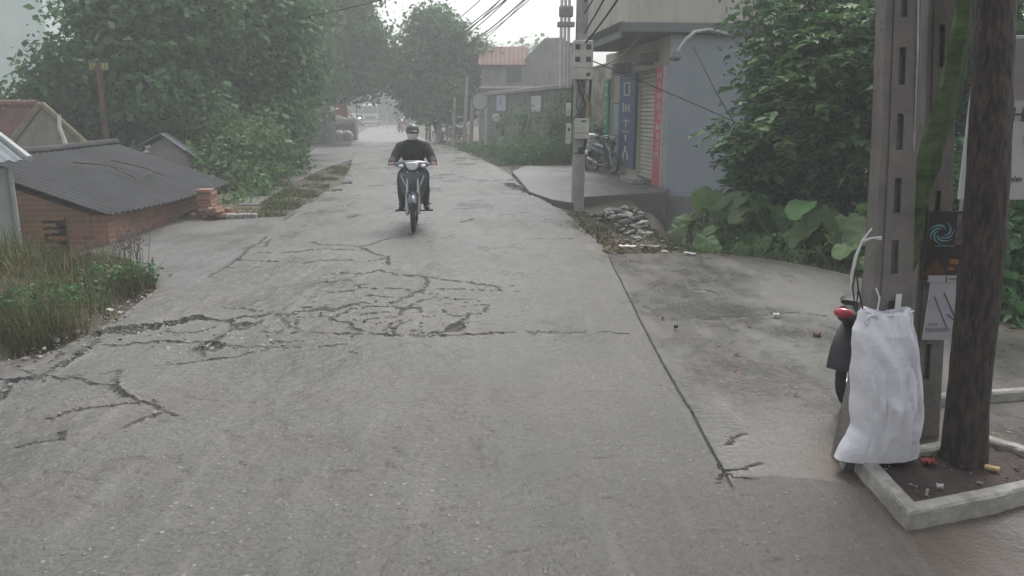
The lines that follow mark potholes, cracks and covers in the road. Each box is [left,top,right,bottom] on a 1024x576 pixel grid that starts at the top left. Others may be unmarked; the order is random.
crack [0,199,837,449]
